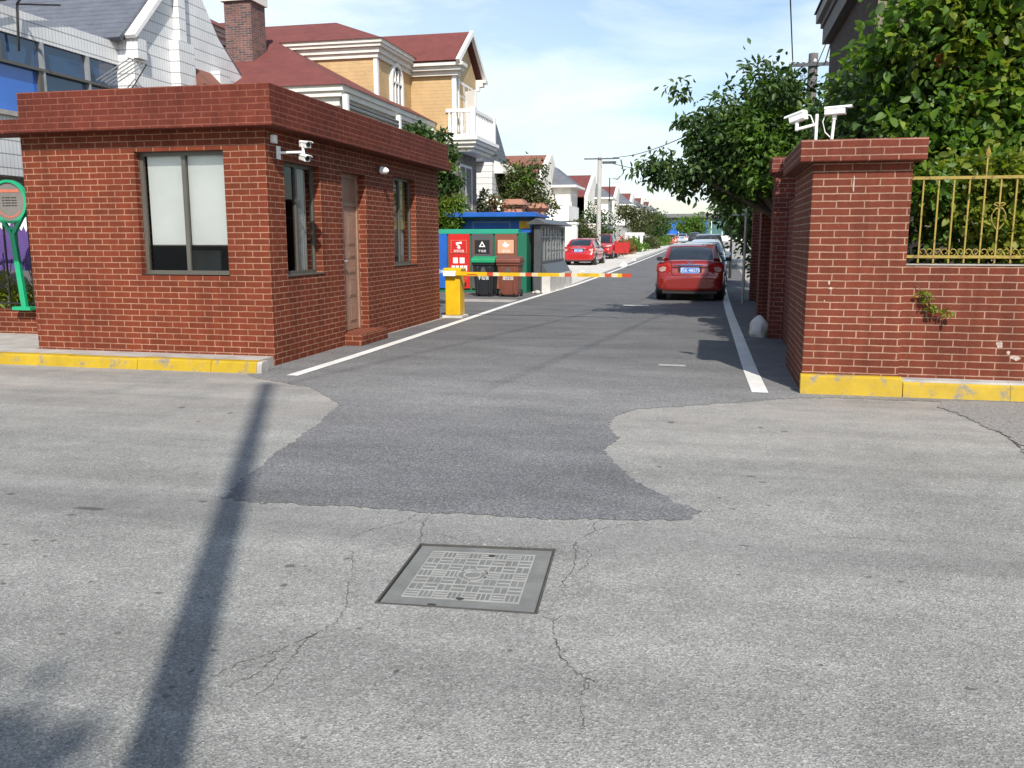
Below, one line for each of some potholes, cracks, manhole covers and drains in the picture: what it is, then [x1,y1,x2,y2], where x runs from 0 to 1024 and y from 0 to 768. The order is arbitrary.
crack [553,519,628,604]
manhole cover [374,543,556,614]
crack [211,551,354,697]
crack [545,617,595,729]
